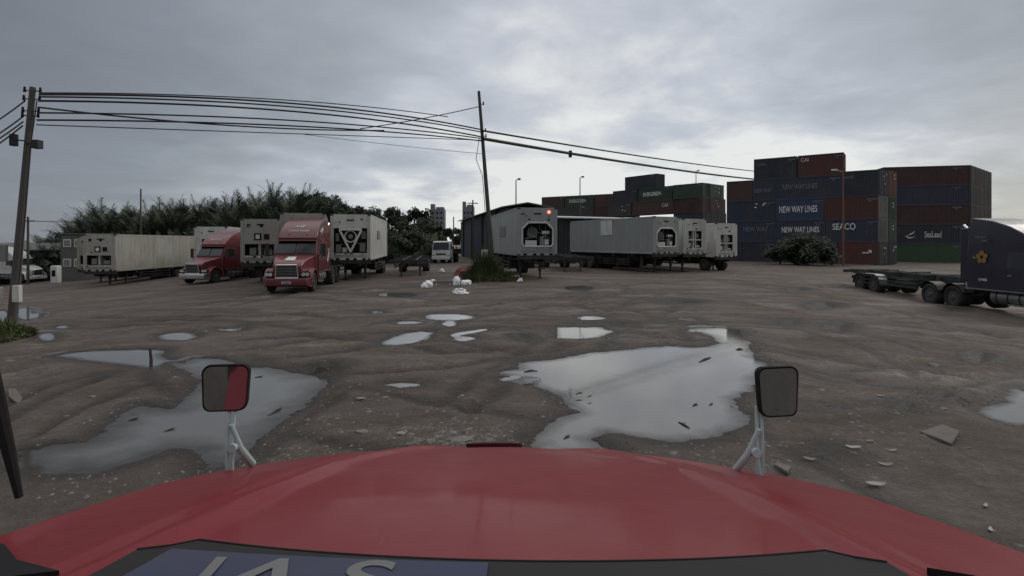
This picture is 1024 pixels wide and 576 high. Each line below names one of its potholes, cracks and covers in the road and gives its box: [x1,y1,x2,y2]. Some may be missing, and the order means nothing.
pothole [373,330,439,346]
pothole [966,384,1024,427]
pothole [31,332,62,343]
pothole [446,334,484,342]
pothole [420,313,480,321]
pothole [0,356,339,480]
pothole [375,380,432,389]
pothole [443,326,504,337]
pothole [490,327,778,452]
pothole [47,347,178,368]
pothole [151,331,203,341]
